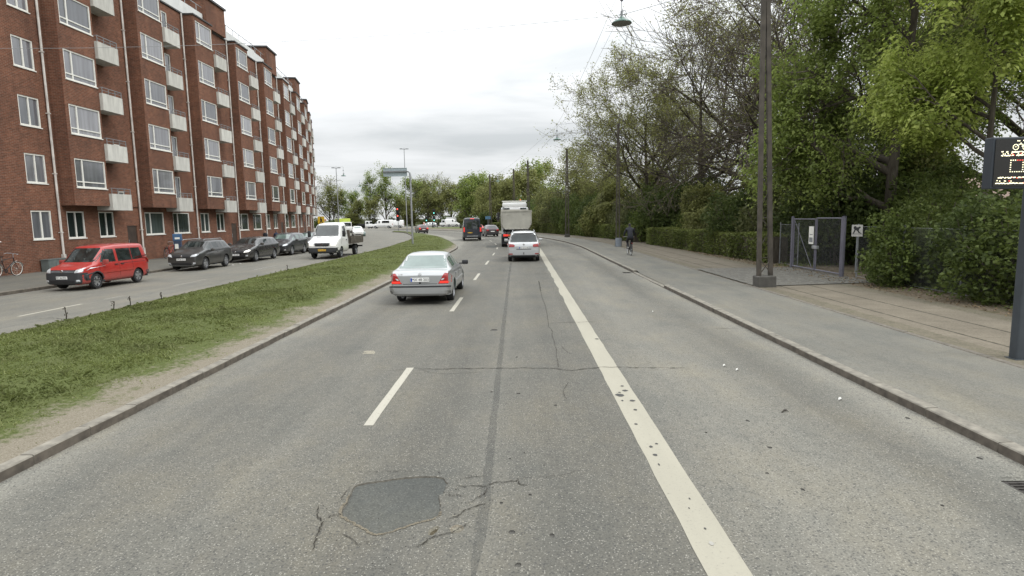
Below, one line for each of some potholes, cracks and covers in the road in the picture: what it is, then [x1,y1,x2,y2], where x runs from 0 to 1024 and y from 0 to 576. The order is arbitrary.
crack [313,490,377,549]
crack [381,273,682,399]
crack [412,469,581,547]
